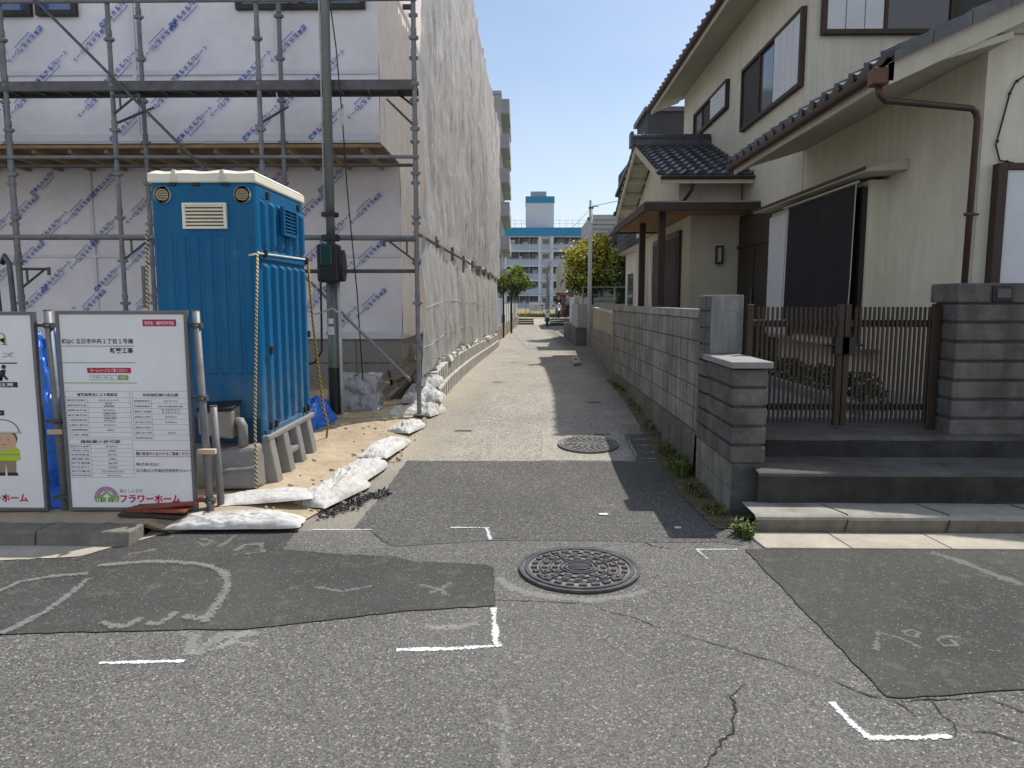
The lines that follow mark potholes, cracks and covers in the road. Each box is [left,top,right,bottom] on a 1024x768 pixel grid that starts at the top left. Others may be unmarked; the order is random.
crack [704,684,744,768]
crack [513,600,1024,743]
manhole cover [519,546,640,594]
manhole cover [558,435,619,453]
